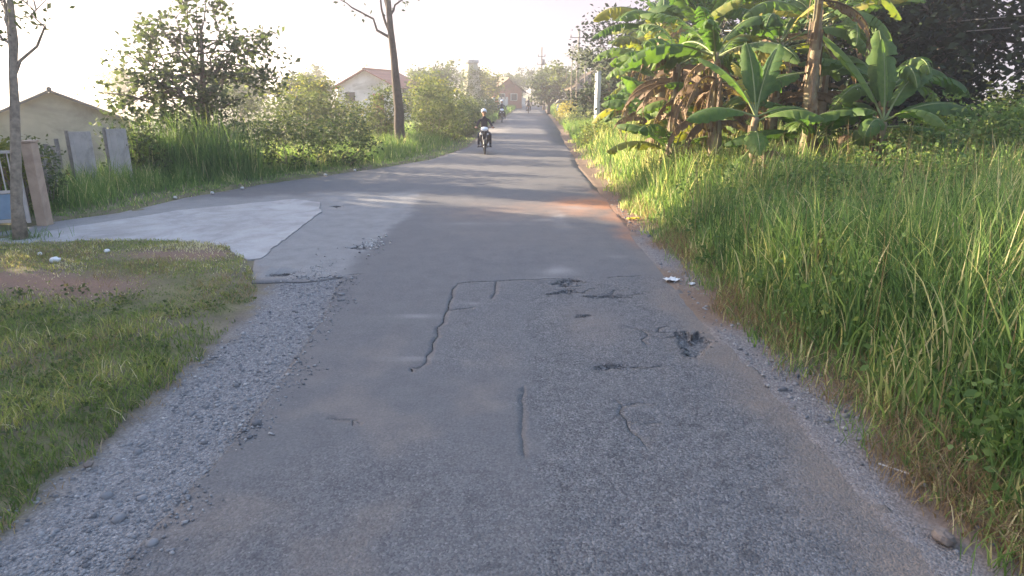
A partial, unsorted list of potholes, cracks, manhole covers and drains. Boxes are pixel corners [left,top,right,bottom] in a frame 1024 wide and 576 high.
pothole [591,363,628,371]
crack [410,276,640,372]
crack [630,326,673,344]
pothole [552,278,582,287]
pothole [674,330,718,359]
crack [618,402,661,448]
